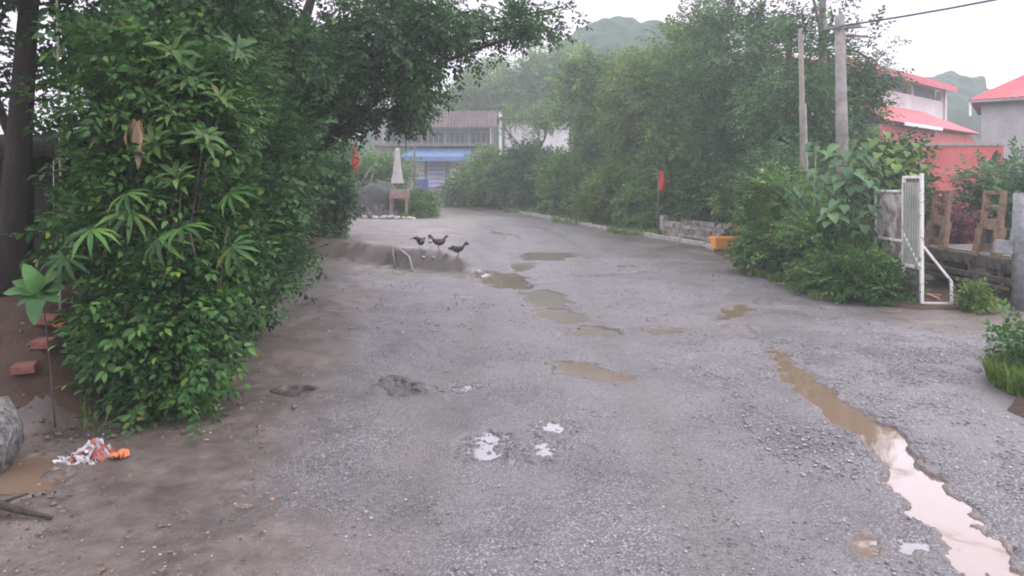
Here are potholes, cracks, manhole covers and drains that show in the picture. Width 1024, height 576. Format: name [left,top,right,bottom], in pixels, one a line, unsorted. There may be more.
pothole [520,418,583,441]
pothole [561,323,632,340]
pothole [544,359,637,386]
pothole [524,307,591,330]
pothole [463,268,541,292]
pothole [512,288,576,307]
pothole [514,251,583,261]
pothole [507,262,539,272]
pothole [269,384,322,397]
pothole [642,326,692,336]
pothole [372,374,426,397]
